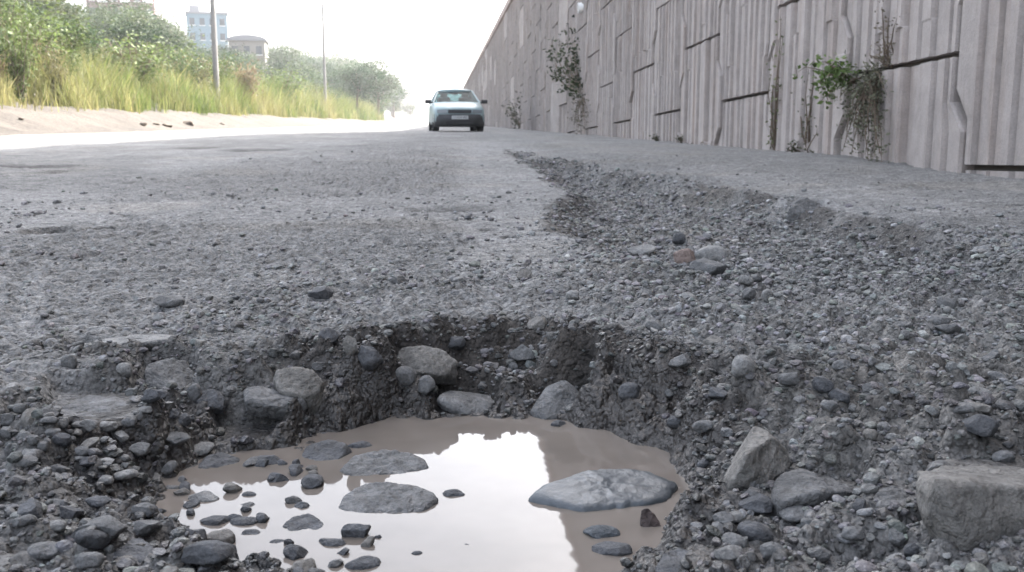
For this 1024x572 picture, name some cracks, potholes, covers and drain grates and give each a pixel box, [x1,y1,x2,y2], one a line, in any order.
pothole [0,312,1024,572]
pothole [505,149,1024,303]
